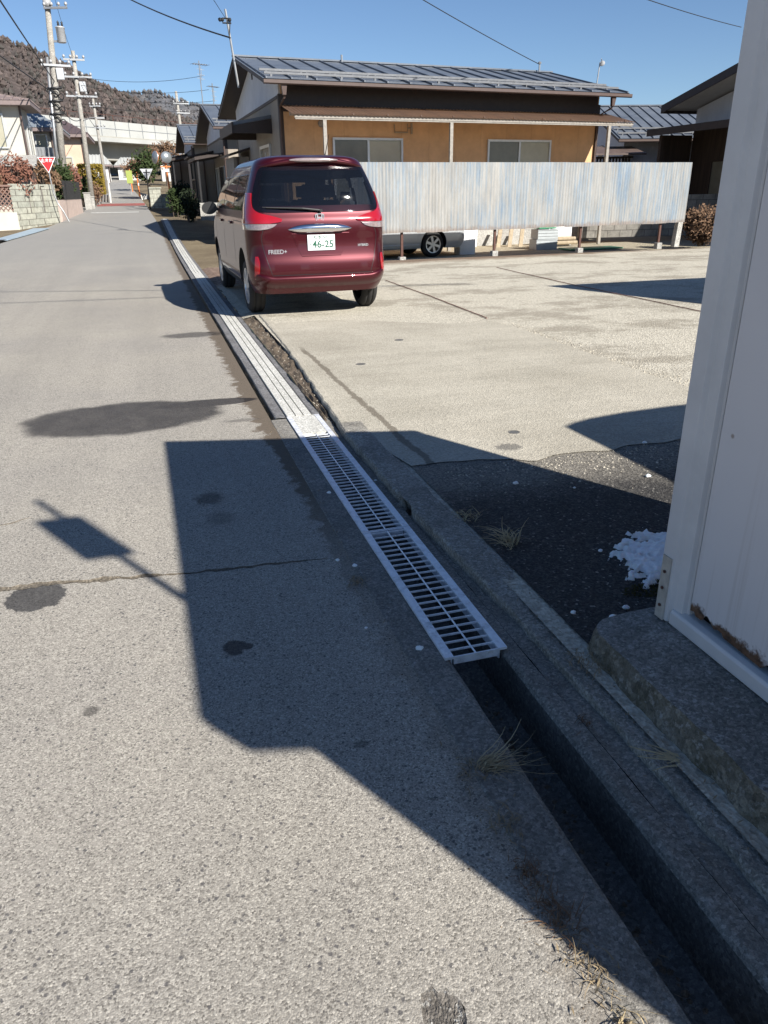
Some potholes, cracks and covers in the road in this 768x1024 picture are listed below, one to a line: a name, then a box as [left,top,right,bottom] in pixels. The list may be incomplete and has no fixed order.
drain grate [362,526,507,664]
crack [0,558,327,592]
pothole [421,985,467,1024]
drain grate [287,414,409,534]
